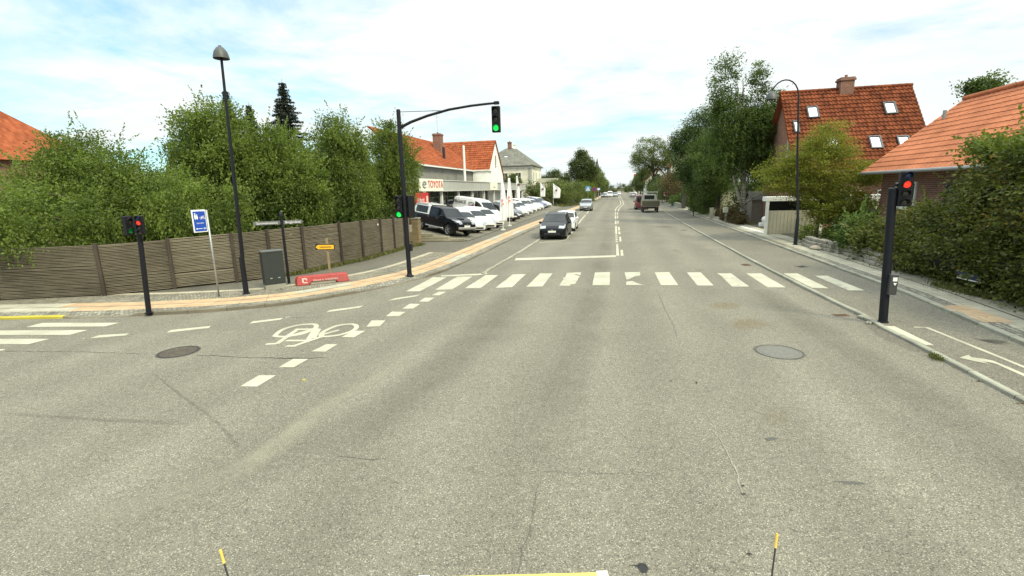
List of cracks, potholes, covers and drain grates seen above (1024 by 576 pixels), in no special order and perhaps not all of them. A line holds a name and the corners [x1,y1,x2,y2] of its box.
manhole cover [155,346,201,359]
manhole cover [753,344,806,360]
crack [517,470,662,572]
